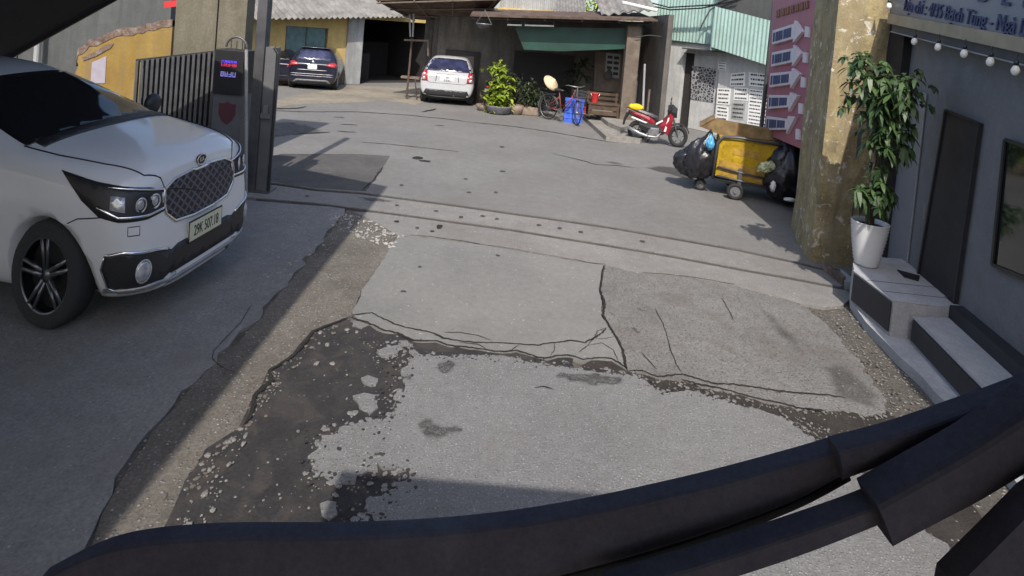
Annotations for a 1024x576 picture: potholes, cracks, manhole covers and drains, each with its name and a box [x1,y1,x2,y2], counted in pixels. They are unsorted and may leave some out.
pothole [409,340,513,358]
crack [212,305,846,424]
pothole [164,320,413,527]
pothole [582,360,634,376]
pothole [512,352,573,367]
